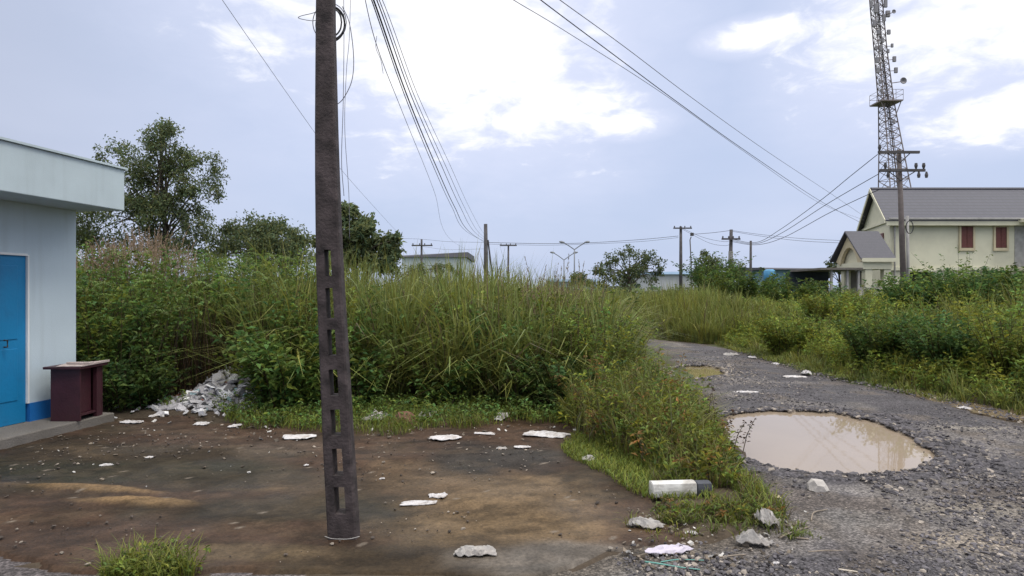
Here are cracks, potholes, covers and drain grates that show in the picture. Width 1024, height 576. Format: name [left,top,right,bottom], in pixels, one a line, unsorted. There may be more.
pothole [705,405,1024,499]
